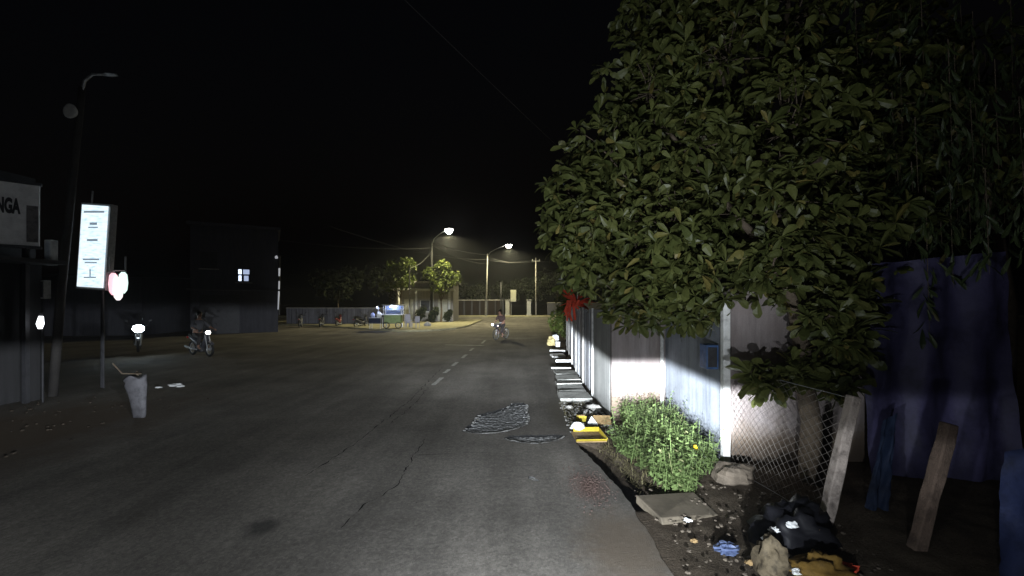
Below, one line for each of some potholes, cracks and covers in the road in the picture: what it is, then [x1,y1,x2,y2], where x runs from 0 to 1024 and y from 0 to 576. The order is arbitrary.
pothole [462,403,531,434]
crack [342,439,478,527]
pothole [504,434,565,444]
